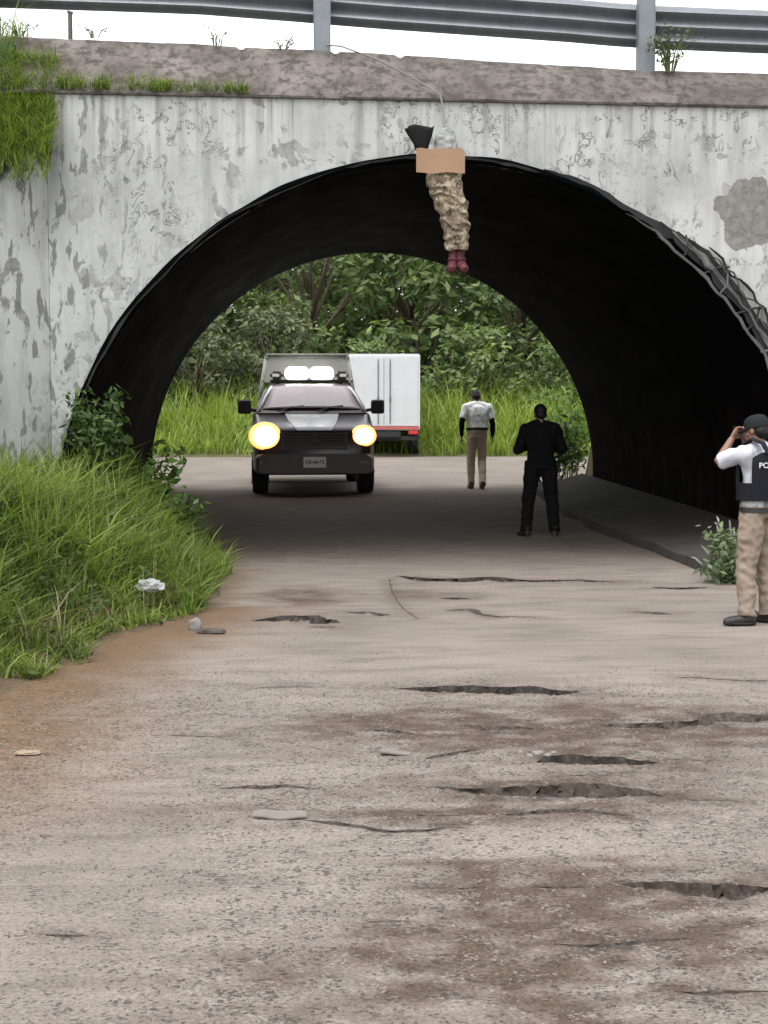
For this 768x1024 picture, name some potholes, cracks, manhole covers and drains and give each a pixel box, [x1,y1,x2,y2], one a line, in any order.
crack [306,808,633,833]
pothole [622,881,768,901]
pothole [399,685,580,696]
pothole [432,782,662,800]
pothole [536,754,658,766]
pothole [603,712,768,730]
crack [314,576,616,628]
crack [557,938,686,949]
pothole [254,615,340,624]
